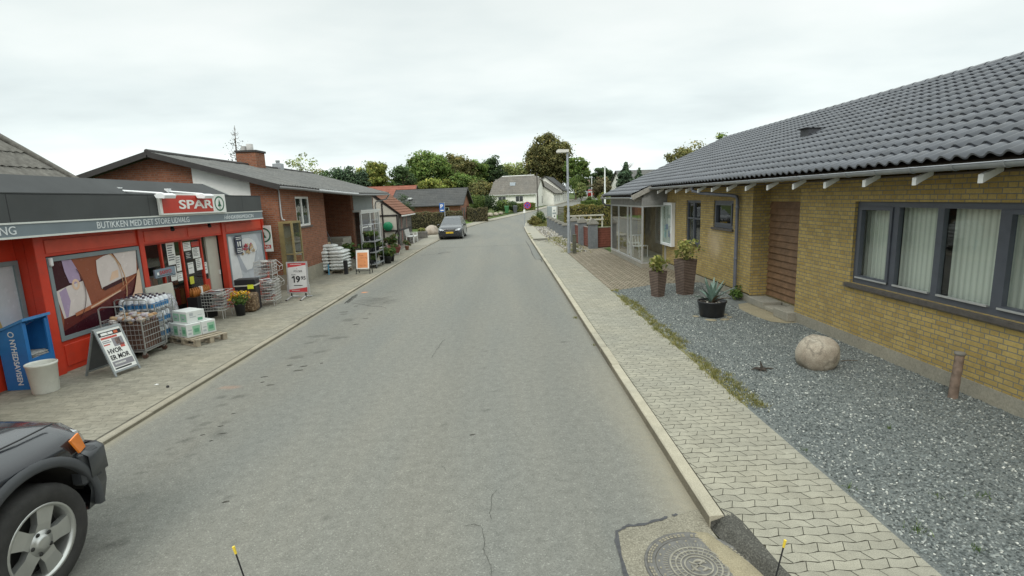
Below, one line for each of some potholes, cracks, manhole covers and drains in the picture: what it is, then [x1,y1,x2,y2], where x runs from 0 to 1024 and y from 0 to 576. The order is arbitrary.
crack [466,491,496,576]
manhole cover [644,532,751,576]
